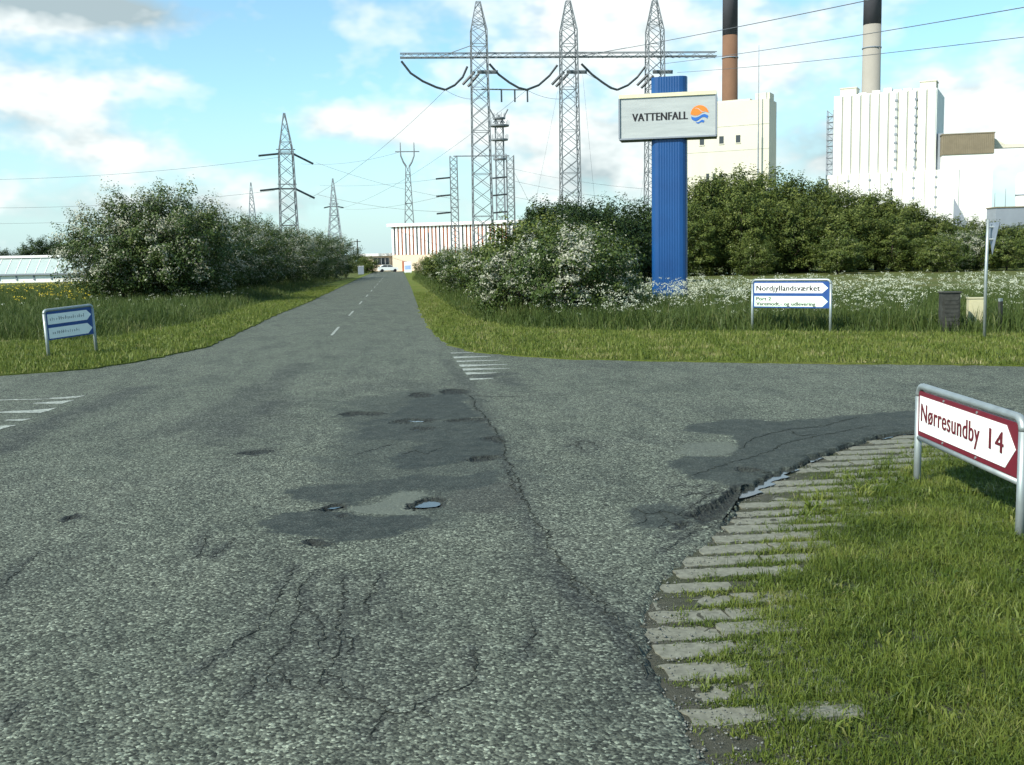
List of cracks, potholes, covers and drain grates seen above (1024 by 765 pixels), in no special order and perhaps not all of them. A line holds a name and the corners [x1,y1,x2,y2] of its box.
crack [637,417,867,550]
crack [198,564,479,739]
pothole [305,502,351,513]
pothole [299,537,335,548]
pothole [51,513,88,523]
pothole [400,497,449,512]
crack [469,395,646,679]
